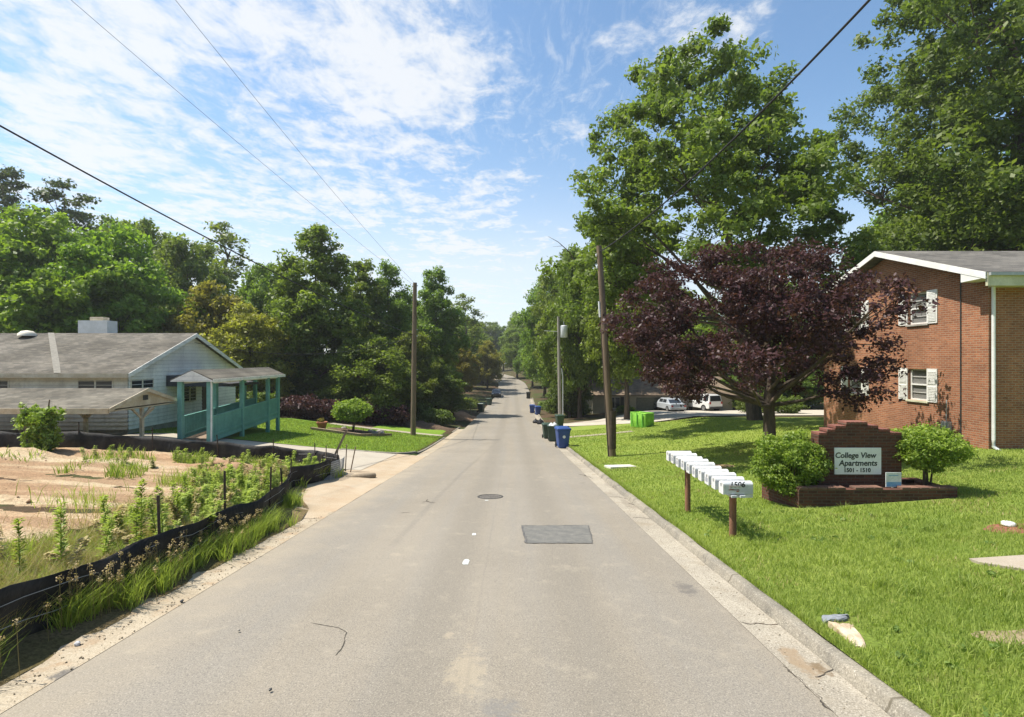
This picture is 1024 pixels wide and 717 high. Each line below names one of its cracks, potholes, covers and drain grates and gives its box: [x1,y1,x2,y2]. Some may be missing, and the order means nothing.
crack [784,666,836,713]
